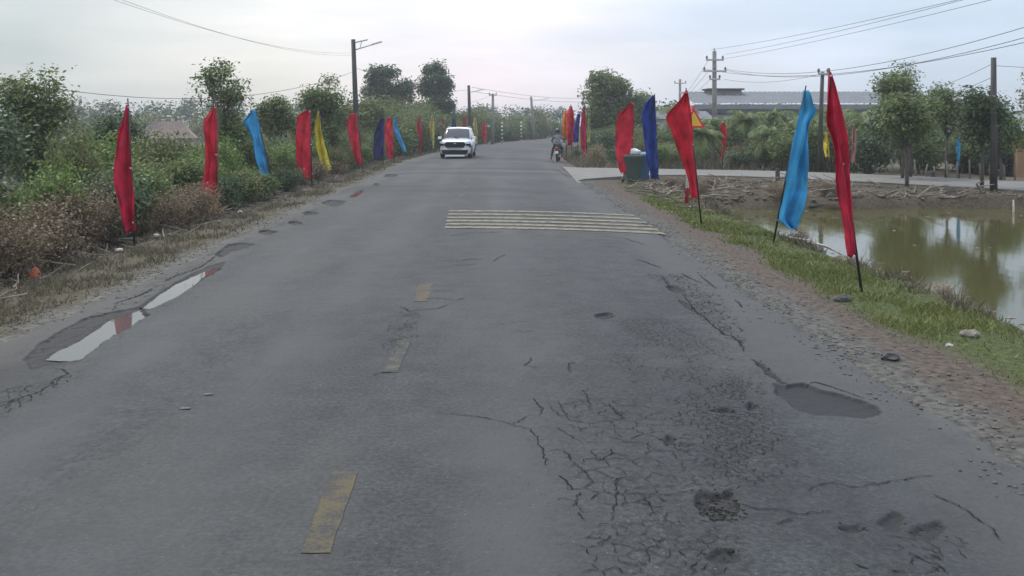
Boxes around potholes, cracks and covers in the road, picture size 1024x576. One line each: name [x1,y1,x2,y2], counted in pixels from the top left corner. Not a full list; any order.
pothole [677,484,760,530]
crack [0,368,81,417]
pothole [584,311,624,322]
crack [609,236,766,405]
crack [854,494,998,574]
pothole [900,515,967,549]
crack [374,290,462,375]
pothole [314,199,352,207]
pothole [861,504,920,539]
pothole [762,379,895,424]
pothole [208,242,261,259]
pothole [12,306,158,373]
